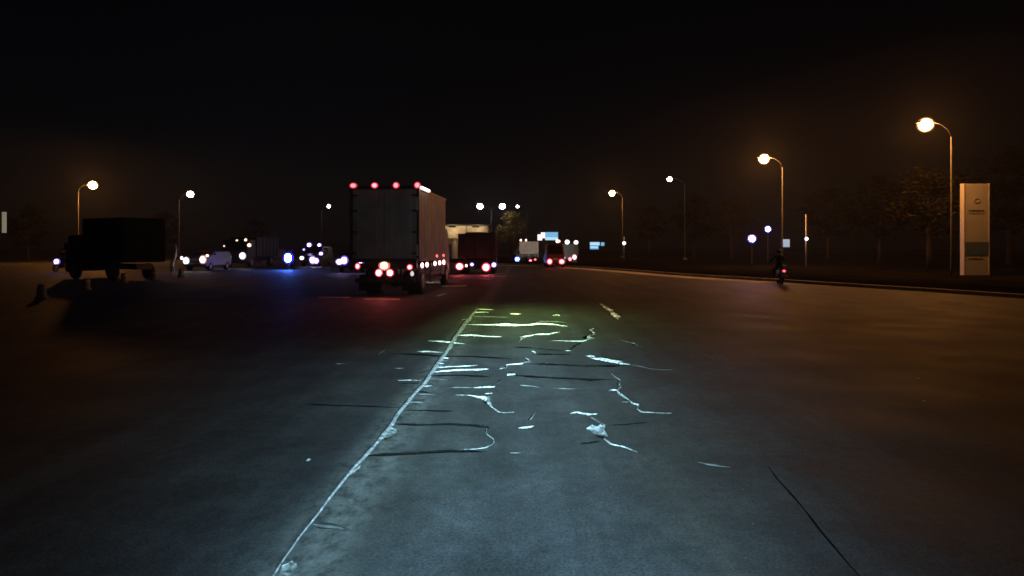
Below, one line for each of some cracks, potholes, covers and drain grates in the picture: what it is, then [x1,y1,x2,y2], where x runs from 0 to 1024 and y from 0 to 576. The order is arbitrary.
crack [273,303,673,576]
